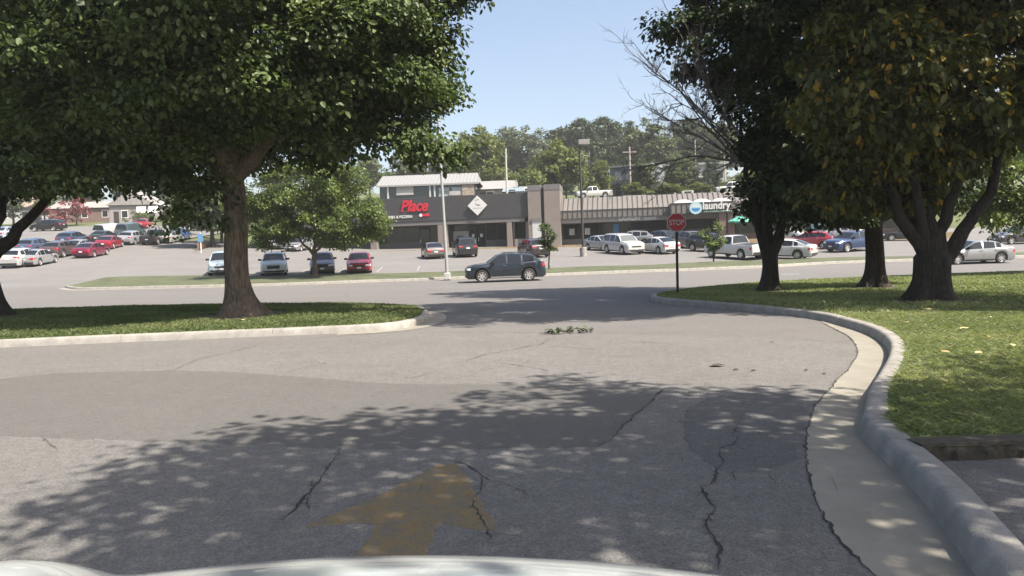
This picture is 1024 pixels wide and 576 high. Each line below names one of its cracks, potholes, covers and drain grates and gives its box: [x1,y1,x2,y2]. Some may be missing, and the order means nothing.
crack [453,460,528,537]
crack [696,410,775,570]
crack [282,445,341,519]
crack [465,340,653,375]
